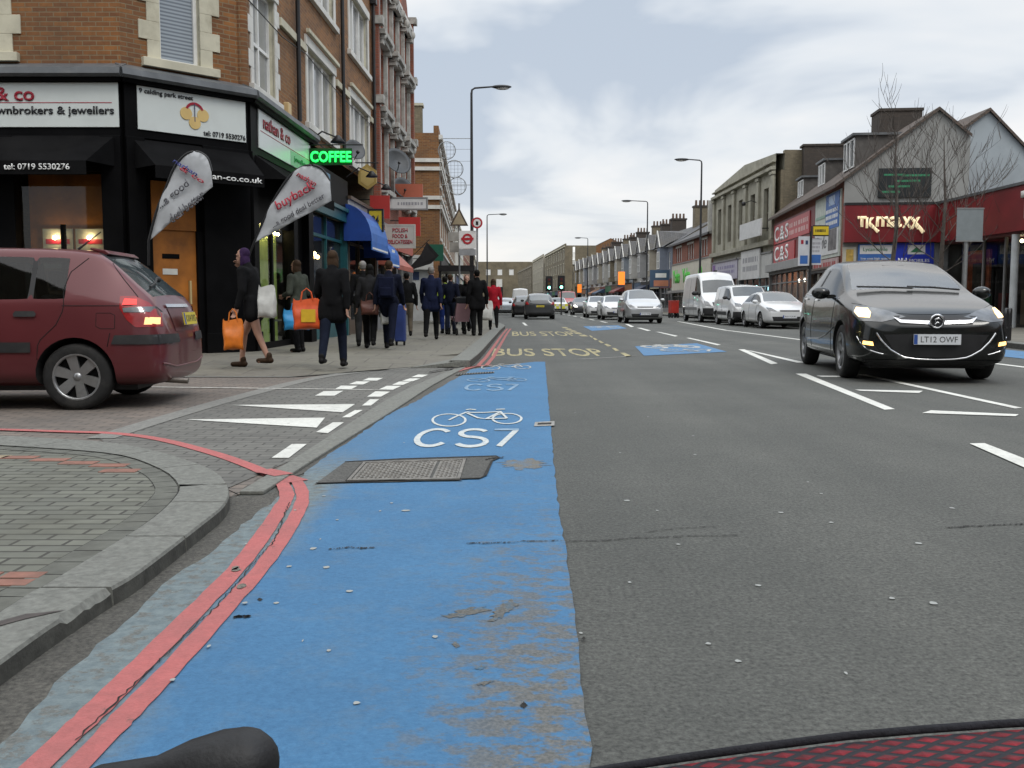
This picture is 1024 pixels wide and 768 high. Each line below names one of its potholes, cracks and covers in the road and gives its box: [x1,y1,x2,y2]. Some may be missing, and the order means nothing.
manhole cover [316,455,500,483]
